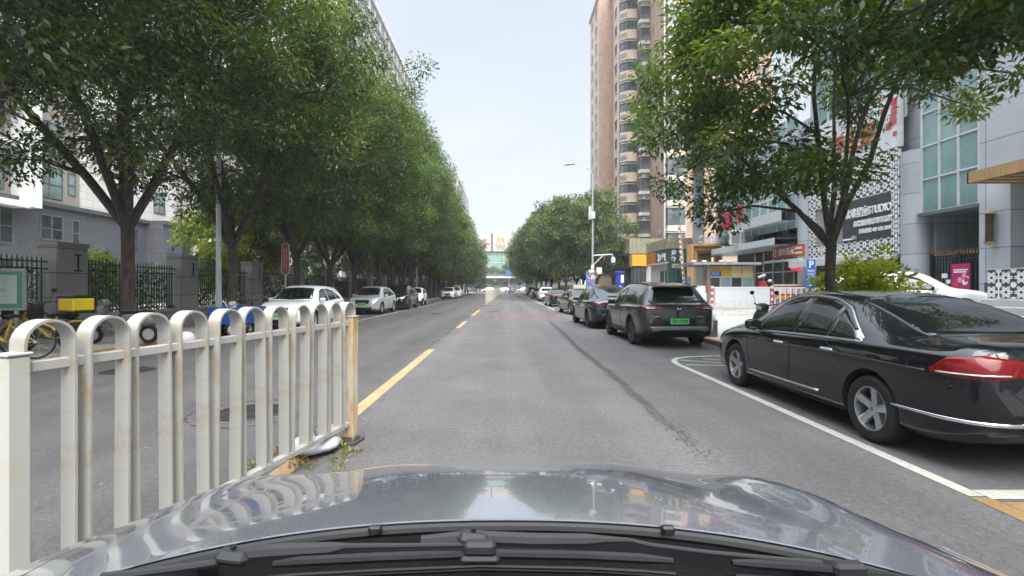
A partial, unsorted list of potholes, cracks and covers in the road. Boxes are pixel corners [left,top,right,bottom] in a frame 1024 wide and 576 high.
manhole cover [99,367,157,375]
crack [549,320,726,464]
manhole cover [183,401,299,428]
